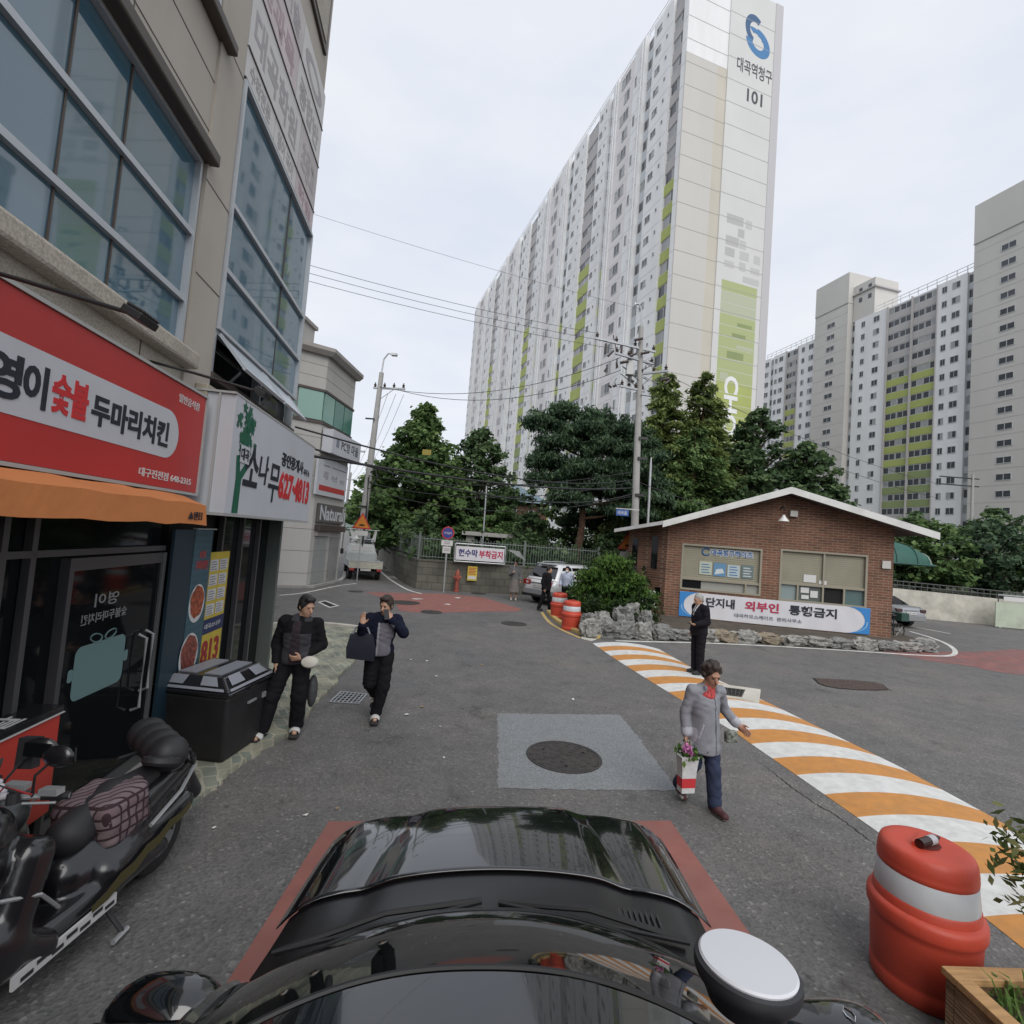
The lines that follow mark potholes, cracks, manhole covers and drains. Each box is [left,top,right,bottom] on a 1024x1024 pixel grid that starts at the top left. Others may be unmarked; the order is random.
crack [766,767,876,845]
drain grate [329,691,367,704]
manhole cover [526,741,602,774]
drain grate [725,687,745,697]
manhole cover [813,678,893,691]
